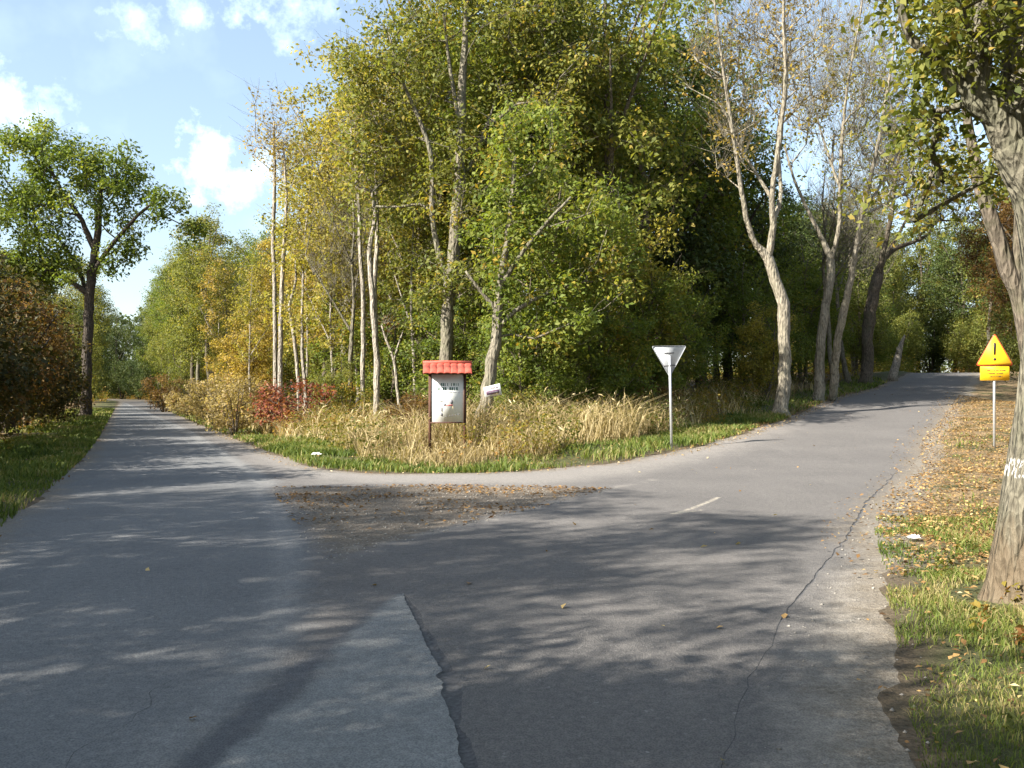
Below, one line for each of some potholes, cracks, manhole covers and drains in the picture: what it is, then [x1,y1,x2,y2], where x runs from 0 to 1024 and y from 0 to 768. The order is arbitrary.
crack [721,470,900,768]
crack [65,683,166,768]
